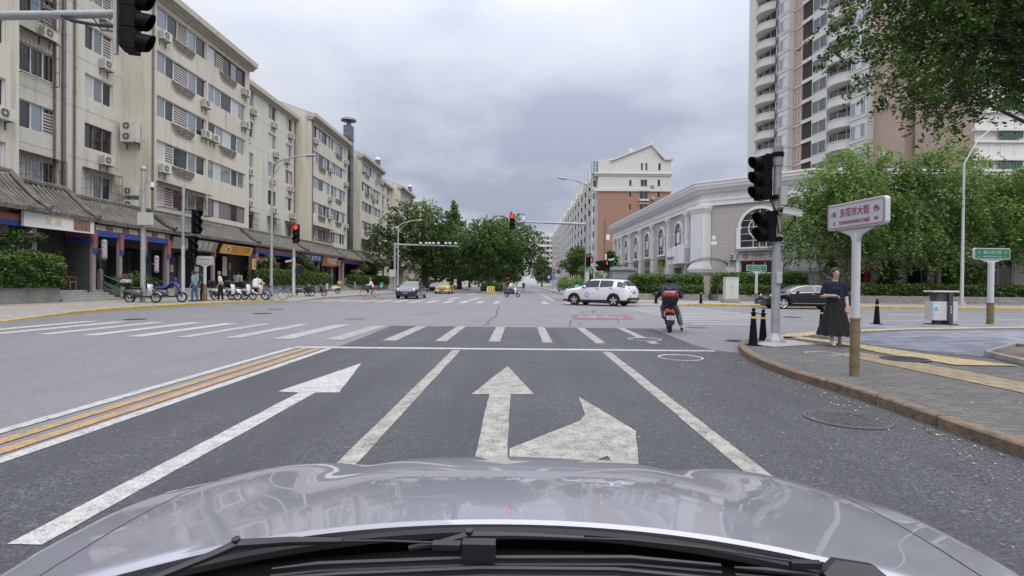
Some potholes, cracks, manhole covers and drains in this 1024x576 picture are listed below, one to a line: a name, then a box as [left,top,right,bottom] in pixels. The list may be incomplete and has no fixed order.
manhole cover [802,409,895,430]
